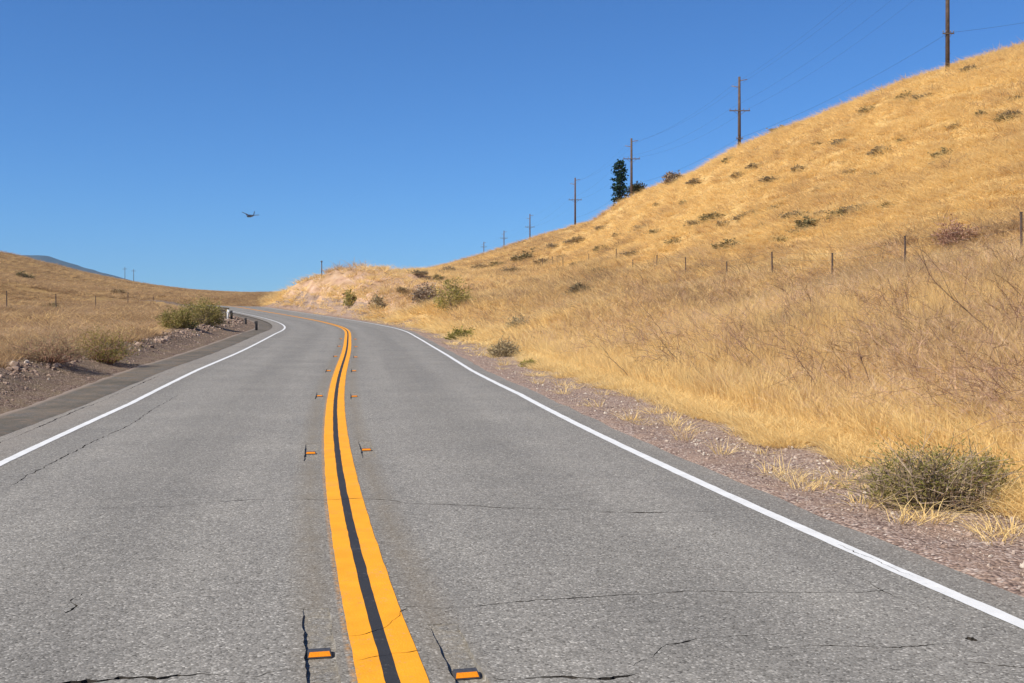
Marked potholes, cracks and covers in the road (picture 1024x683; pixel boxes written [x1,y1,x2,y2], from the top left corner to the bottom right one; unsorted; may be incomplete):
crack [63,669,290,683]
crack [375,551,919,631]
crack [307,499,705,513]
crack [15,395,178,484]
crack [494,633,948,681]
crack [0,377,155,443]
